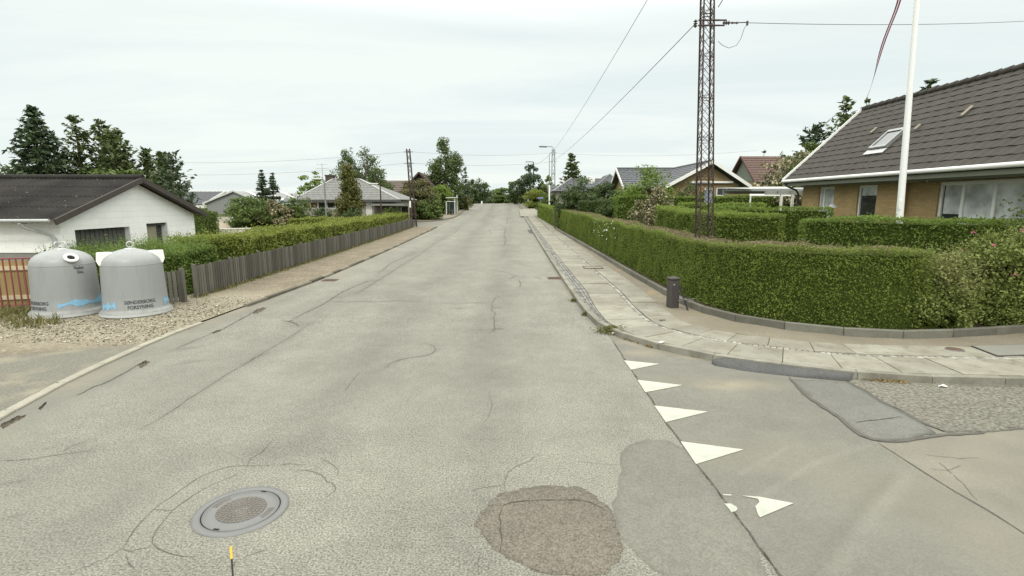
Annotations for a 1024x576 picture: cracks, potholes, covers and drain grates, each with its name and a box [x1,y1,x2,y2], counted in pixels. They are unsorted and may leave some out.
crack [68,445,338,574]
crack [142,253,413,428]
crack [927,454,975,496]
manhole cover [190,486,289,538]
utility cover [971,344,1024,357]
